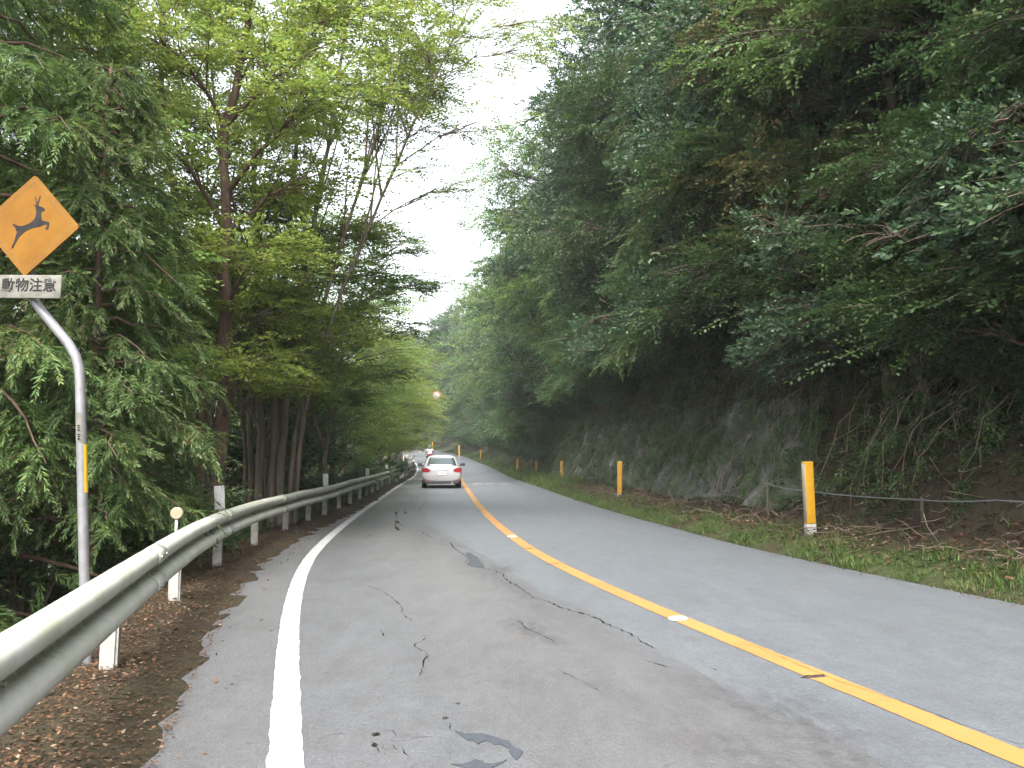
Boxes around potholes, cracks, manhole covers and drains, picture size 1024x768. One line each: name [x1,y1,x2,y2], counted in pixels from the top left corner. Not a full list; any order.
crack [450,543,670,668]
crack [377,588,429,674]
